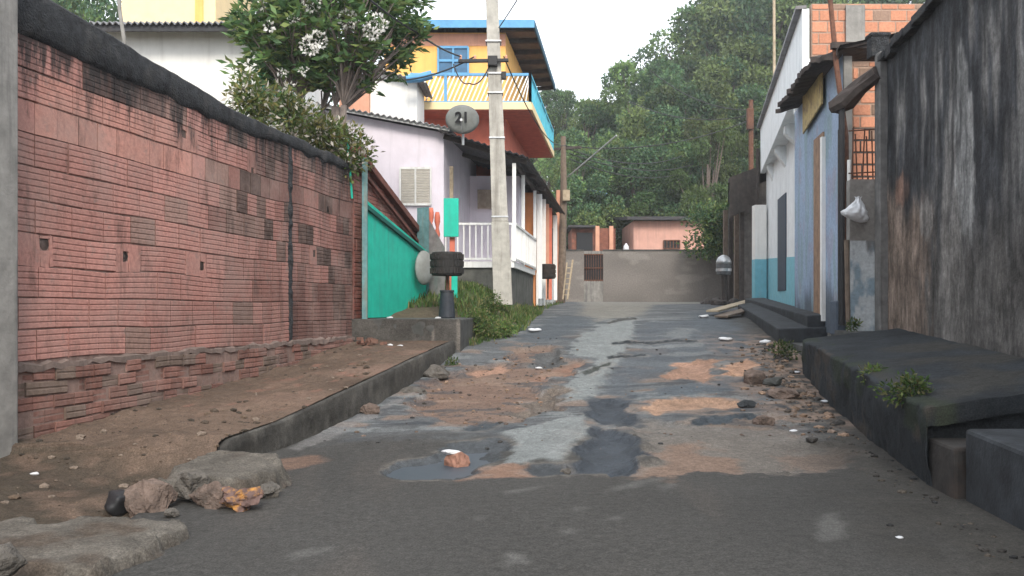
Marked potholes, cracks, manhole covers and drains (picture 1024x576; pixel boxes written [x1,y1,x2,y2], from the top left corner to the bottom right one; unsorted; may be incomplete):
pothole [380,437,515,480]
pothole [511,385,573,423]
pothole [641,398,741,416]
crack [582,317,697,374]
pothole [658,359,722,382]
pothole [718,359,761,376]
